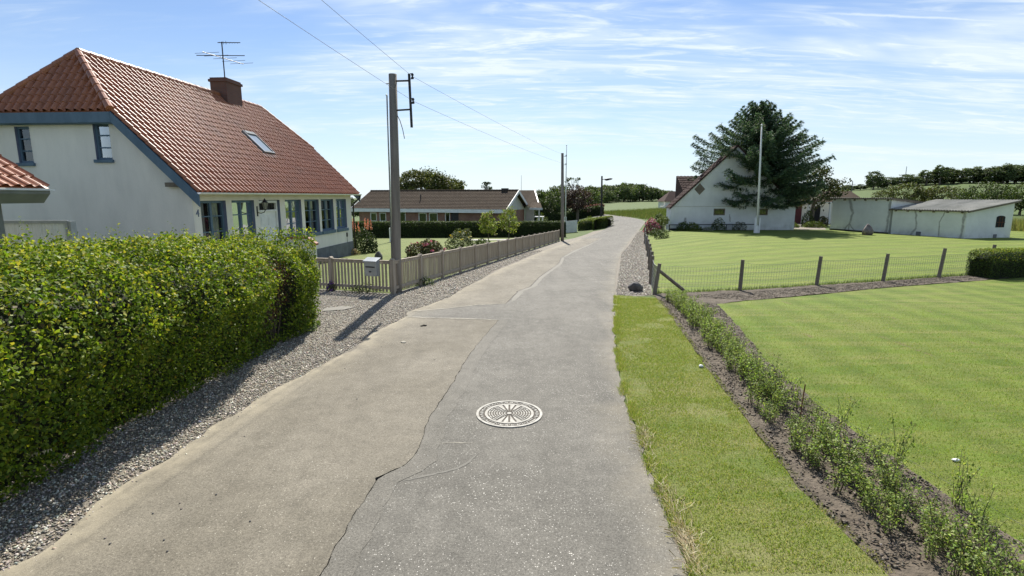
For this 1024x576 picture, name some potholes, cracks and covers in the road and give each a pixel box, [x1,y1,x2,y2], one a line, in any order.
manhole cover [476,400,542,428]
crack [319,327,492,576]
